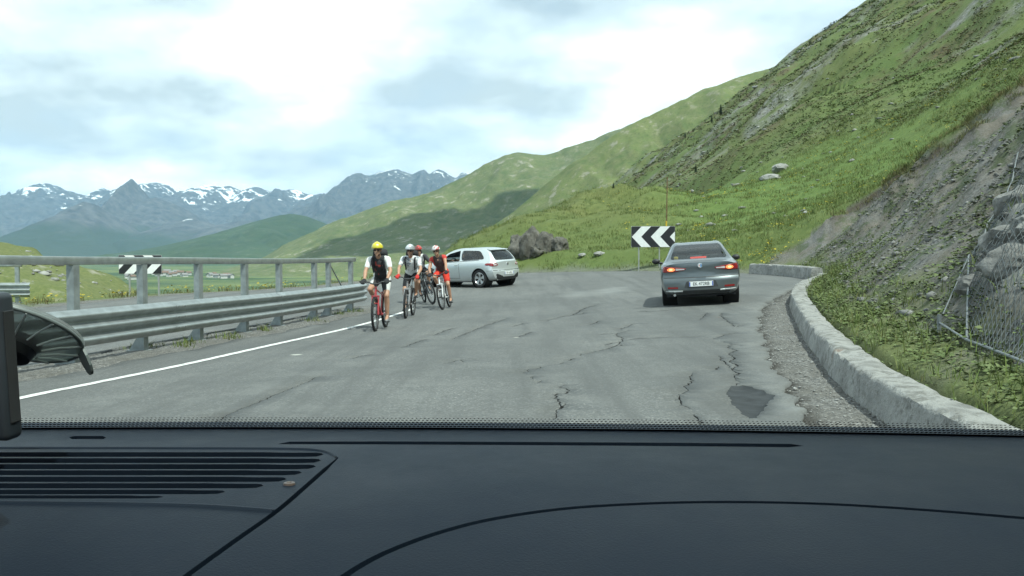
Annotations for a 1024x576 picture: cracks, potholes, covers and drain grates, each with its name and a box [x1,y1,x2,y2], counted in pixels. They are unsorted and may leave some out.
crack [704,313,744,385]
crack [528,367,570,419]
pothole [726,385,775,418]
crack [677,373,702,424]
